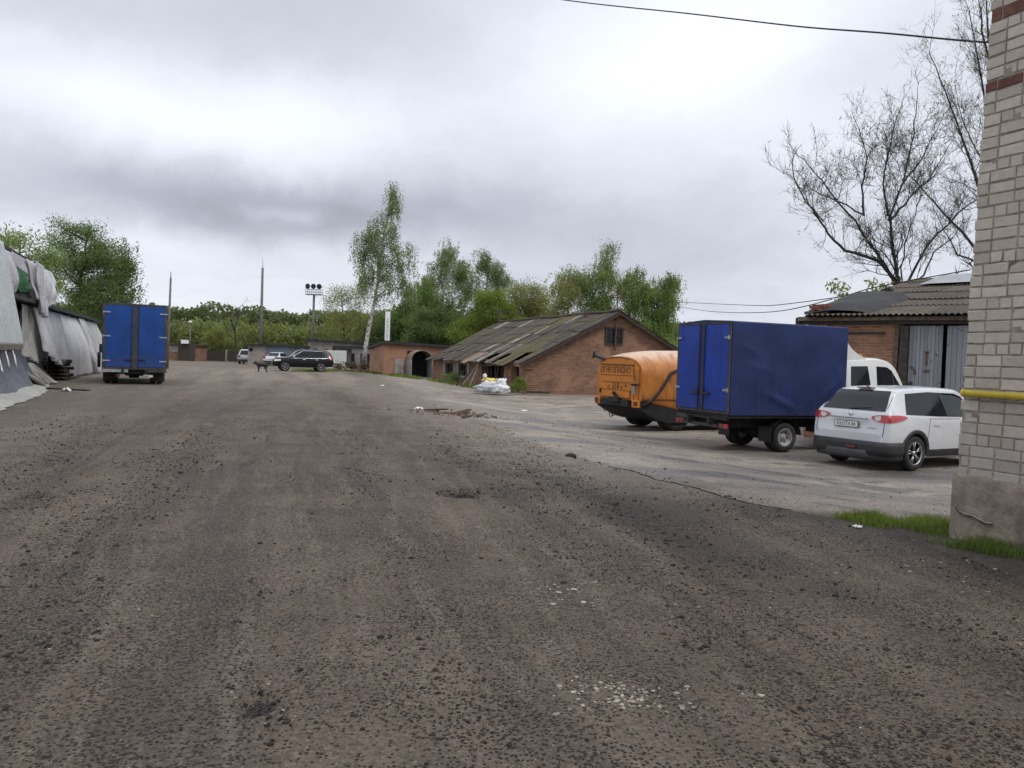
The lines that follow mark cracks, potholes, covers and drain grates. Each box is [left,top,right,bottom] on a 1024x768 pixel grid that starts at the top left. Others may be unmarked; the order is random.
pothole [230,688,289,722]
pothole [427,487,495,500]
